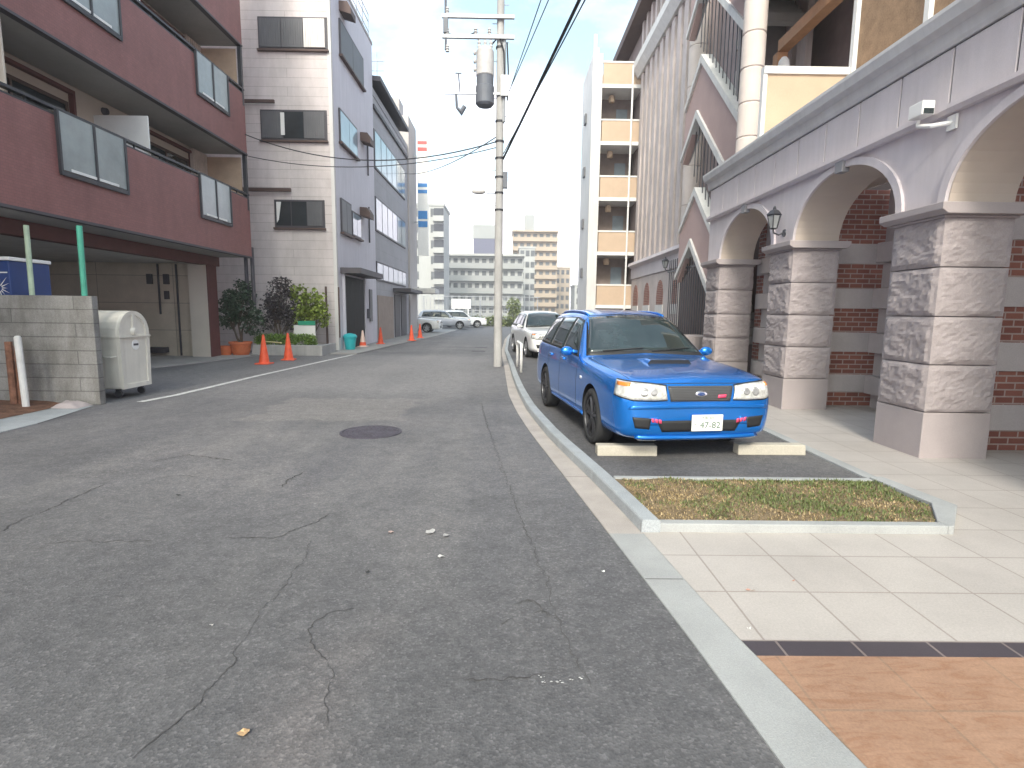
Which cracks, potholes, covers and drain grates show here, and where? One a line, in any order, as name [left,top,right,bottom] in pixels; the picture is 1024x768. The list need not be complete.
crack [502,599,550,624]
crack [134,515,327,757]
crack [308,607,358,723]
manhole cover [339,425,402,439]
crack [456,672,546,681]
